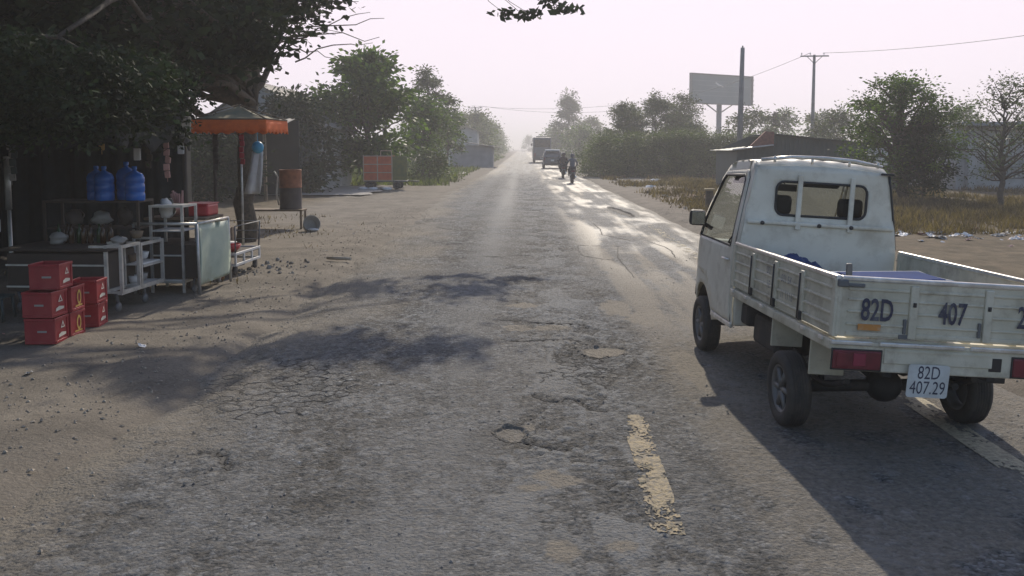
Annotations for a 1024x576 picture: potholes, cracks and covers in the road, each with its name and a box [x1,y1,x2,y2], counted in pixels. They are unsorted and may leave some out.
crack [192,356,360,420]
pothole [491,422,529,443]
crack [577,224,634,277]
crack [496,320,619,412]
